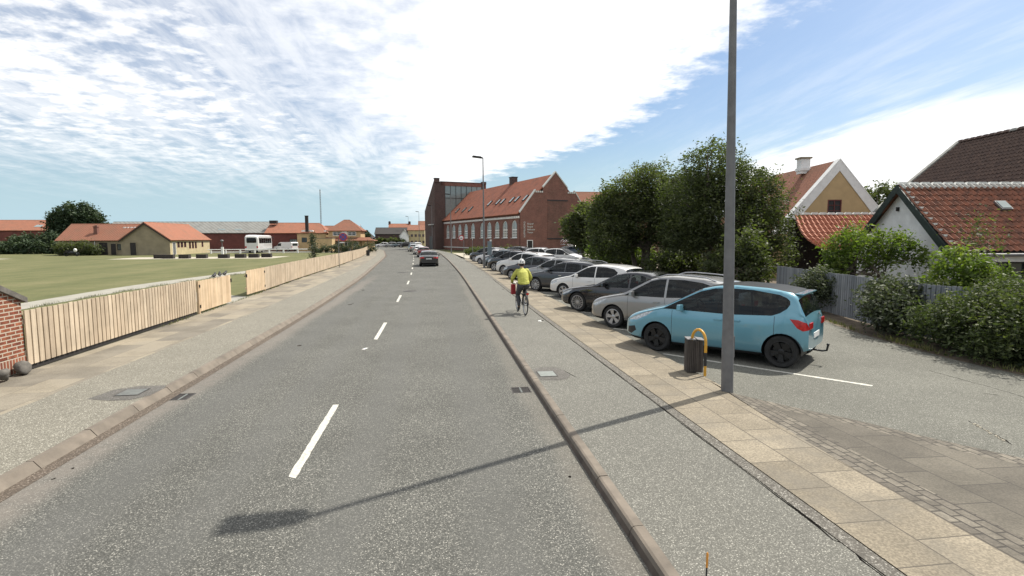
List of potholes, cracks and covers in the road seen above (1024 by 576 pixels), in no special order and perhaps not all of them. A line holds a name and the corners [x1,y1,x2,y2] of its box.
drain grate [169,393,196,401]
manhole cover [88,385,166,400]
manhole cover [533,367,570,380]
